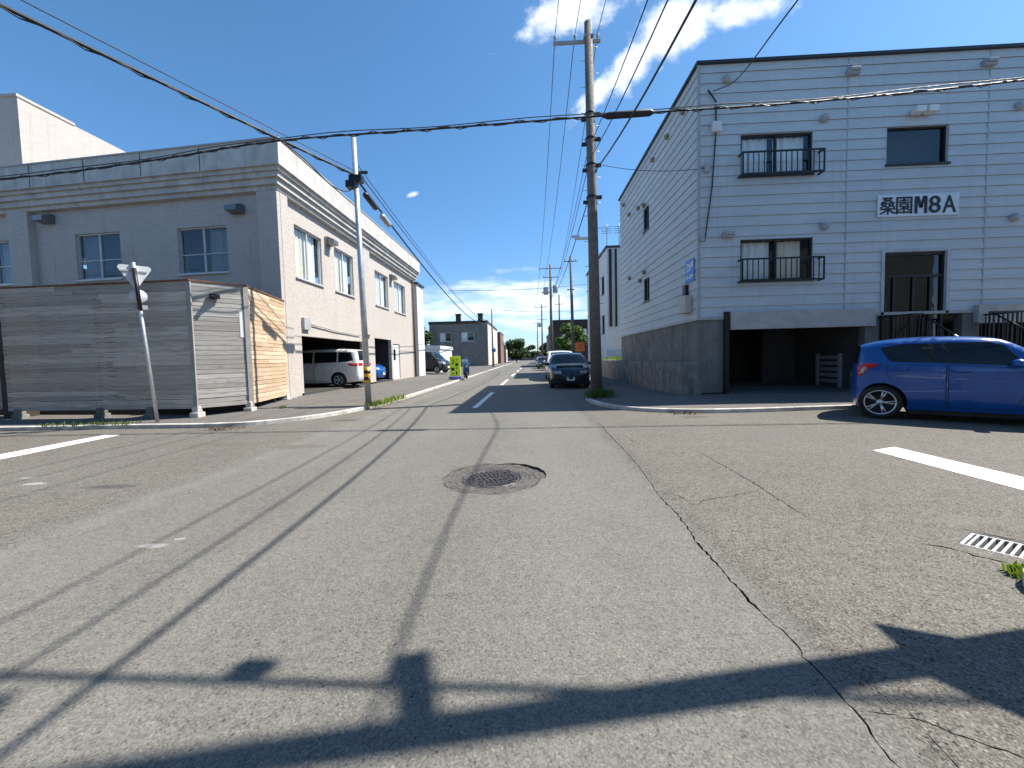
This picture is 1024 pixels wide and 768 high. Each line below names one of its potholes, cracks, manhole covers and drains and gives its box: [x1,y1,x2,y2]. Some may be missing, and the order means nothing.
manhole cover [442,464,544,495]
crack [600,424,1024,768]
drain grate [959,532,1024,561]
